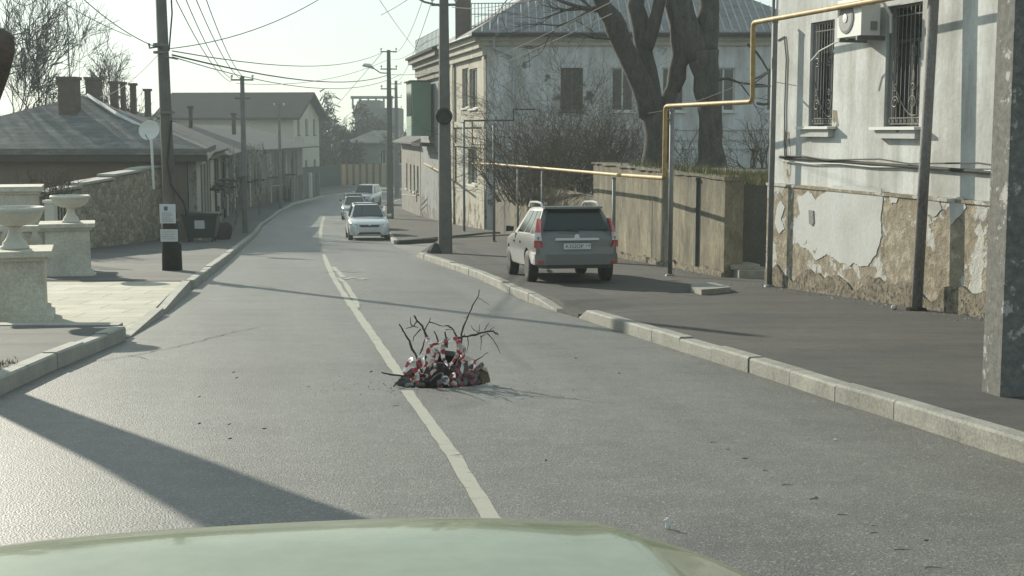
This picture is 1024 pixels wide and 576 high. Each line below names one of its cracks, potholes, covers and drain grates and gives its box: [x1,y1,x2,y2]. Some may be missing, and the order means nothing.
pothole [394,350,490,385]
